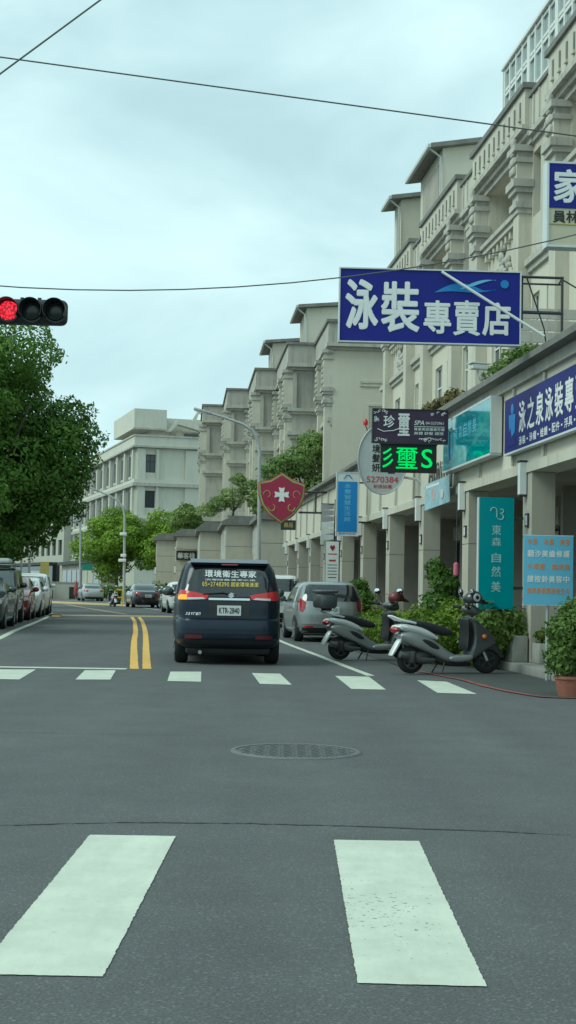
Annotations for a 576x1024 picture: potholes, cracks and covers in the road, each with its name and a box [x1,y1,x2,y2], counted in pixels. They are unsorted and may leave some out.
manhole cover [230,743,362,760]
